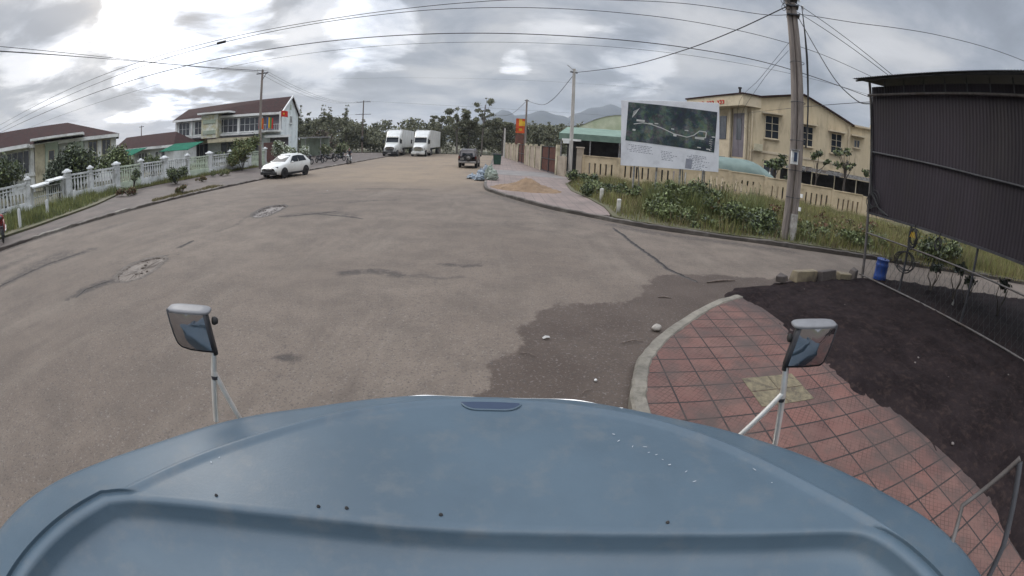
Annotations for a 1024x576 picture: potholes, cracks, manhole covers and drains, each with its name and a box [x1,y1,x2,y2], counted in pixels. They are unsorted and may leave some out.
crack [280,211,362,219]
crack [613,228,697,282]
crack [0,252,84,287]
crack [76,279,115,297]
